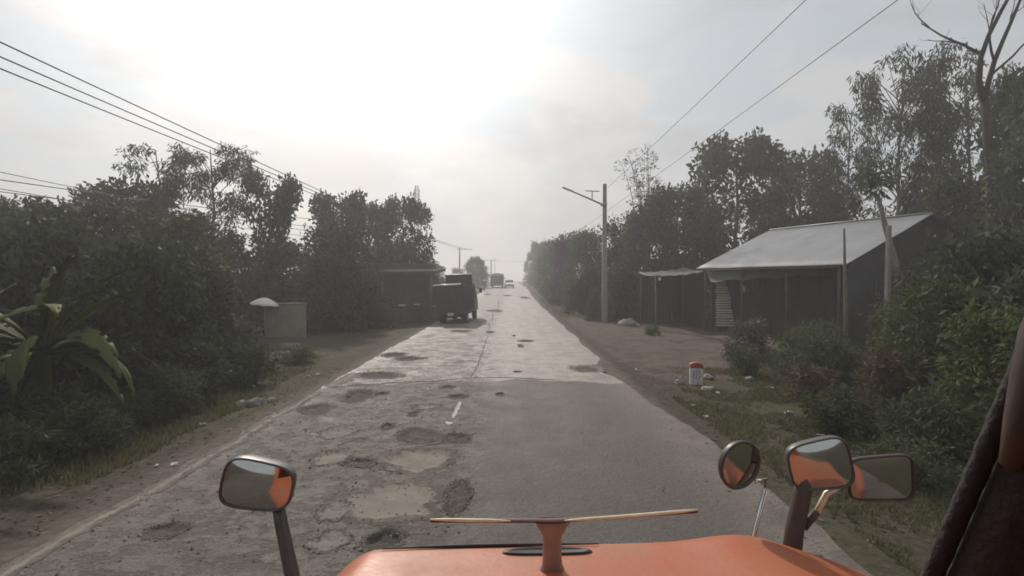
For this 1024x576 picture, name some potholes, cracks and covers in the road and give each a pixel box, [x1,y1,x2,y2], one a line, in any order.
pothole [376,445,460,477]
pothole [340,389,378,404]
pothole [296,403,337,415]
pothole [567,365,605,373]
crack [330,302,578,388]
pothole [358,526,406,554]
pothole [141,520,191,541]
pothole [440,432,472,443]
pothole [340,457,378,468]
pothole [395,427,444,445]
pothole [331,479,446,526]
pothole [356,371,406,379]
